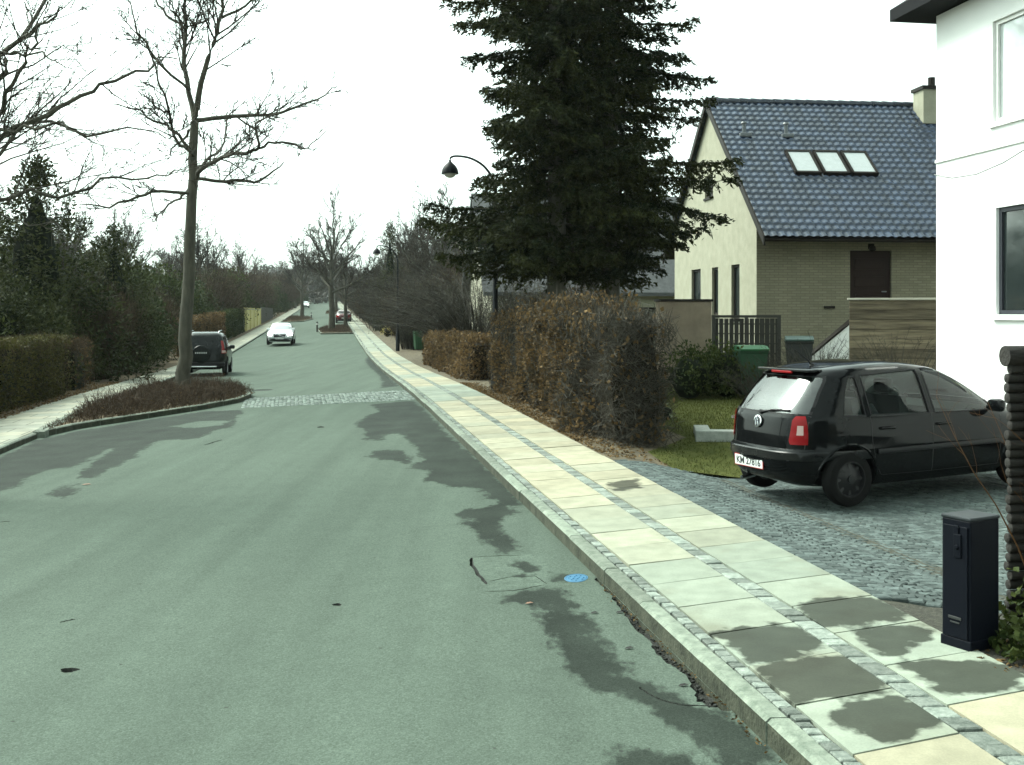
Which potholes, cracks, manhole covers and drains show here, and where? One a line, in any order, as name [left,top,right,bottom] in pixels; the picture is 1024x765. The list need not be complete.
crack [595,579,723,711]
manhole cover [564,574,588,582]
